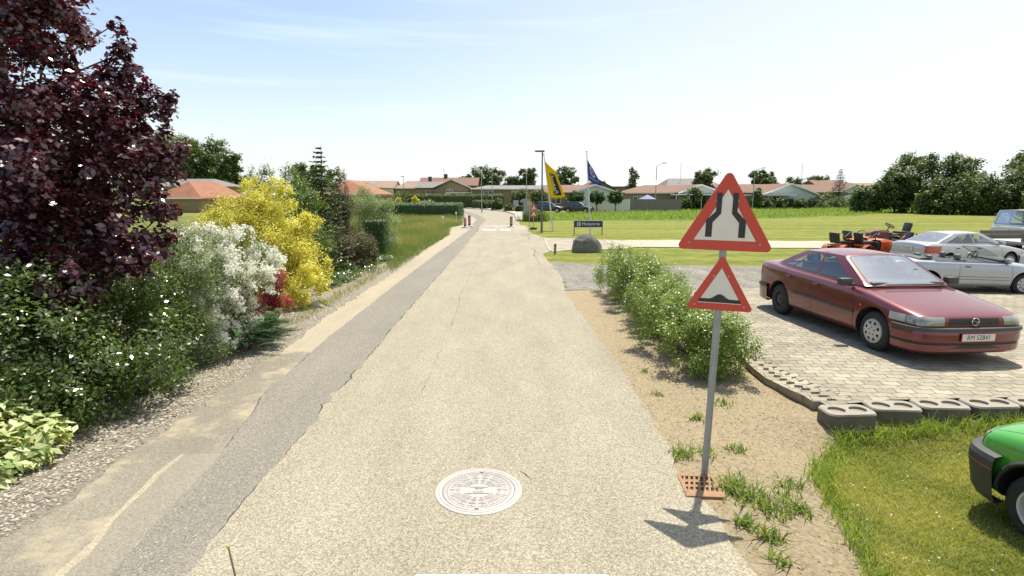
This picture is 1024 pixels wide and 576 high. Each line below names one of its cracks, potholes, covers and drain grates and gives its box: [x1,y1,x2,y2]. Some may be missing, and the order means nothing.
manhole cover [435,468,522,515]
